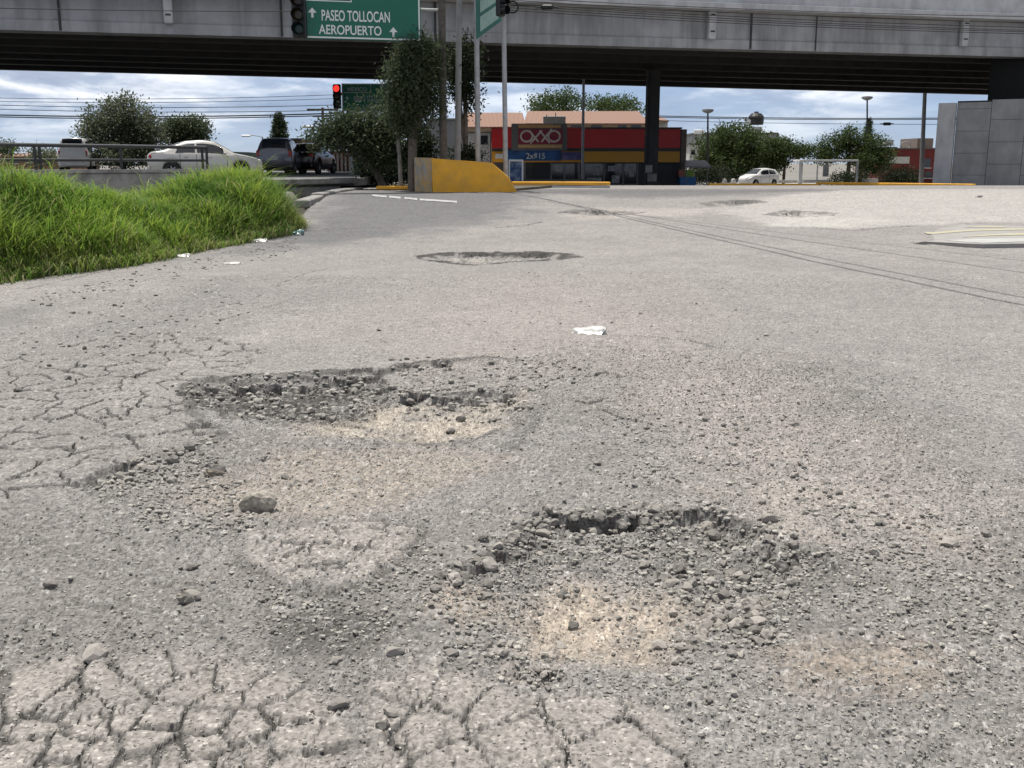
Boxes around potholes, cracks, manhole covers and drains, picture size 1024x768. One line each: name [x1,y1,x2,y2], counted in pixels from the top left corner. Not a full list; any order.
crack [0,332,266,499]
crack [366,671,696,768]
pothole [68,357,577,518]
pothole [418,251,574,265]
pothole [446,508,830,698]
